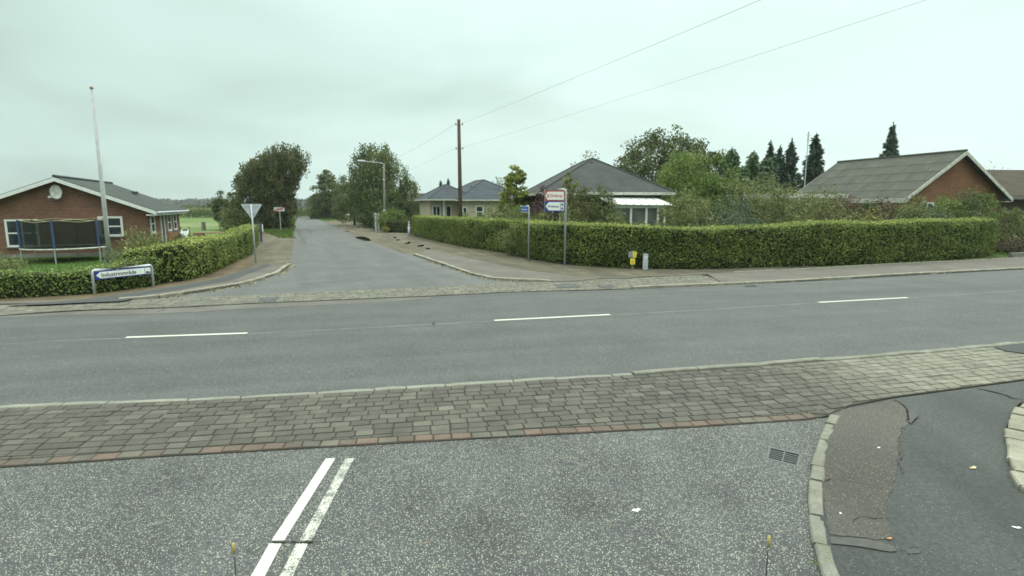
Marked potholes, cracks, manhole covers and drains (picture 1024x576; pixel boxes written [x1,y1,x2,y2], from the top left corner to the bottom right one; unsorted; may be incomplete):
drain grate [766,446,802,467]
